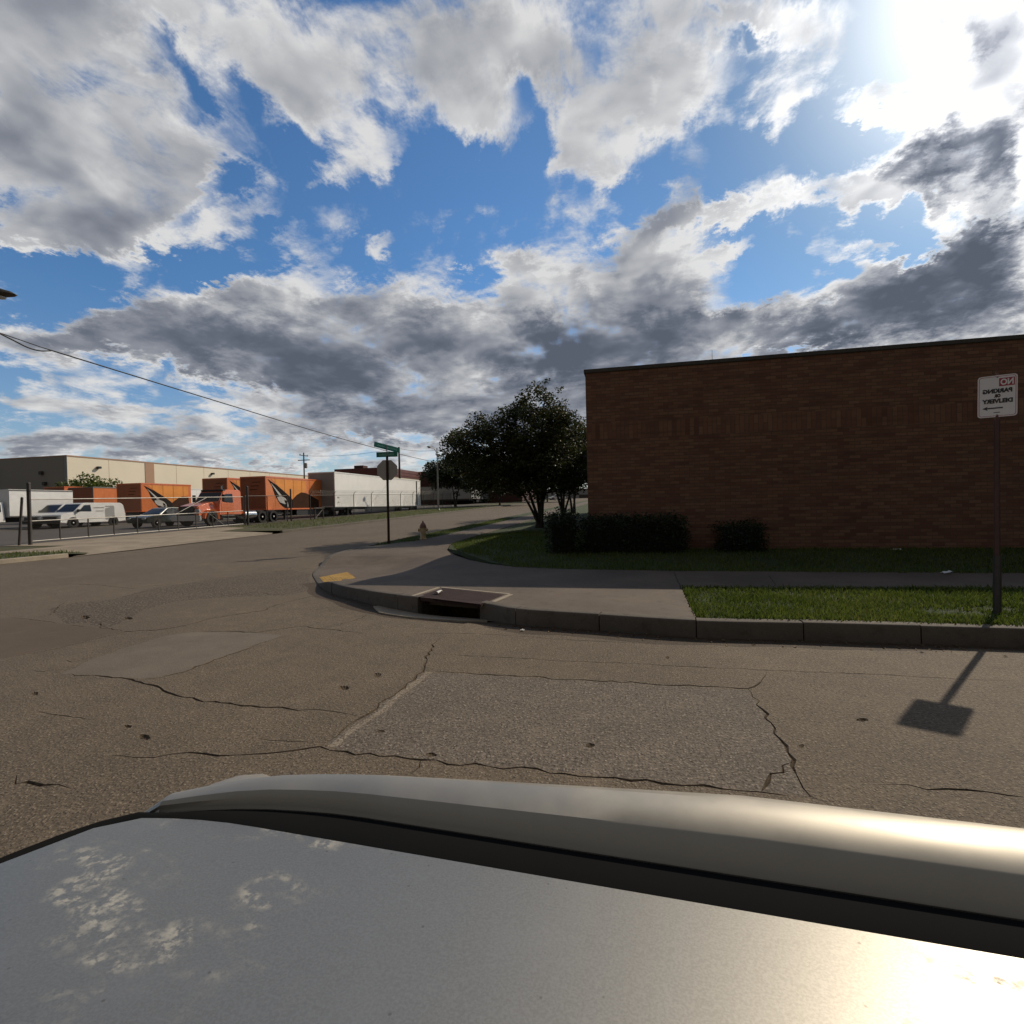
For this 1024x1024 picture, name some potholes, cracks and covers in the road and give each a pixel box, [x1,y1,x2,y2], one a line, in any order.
drain grate [373,587,513,622]
crack [460,655,998,681]
crack [23,568,827,804]
